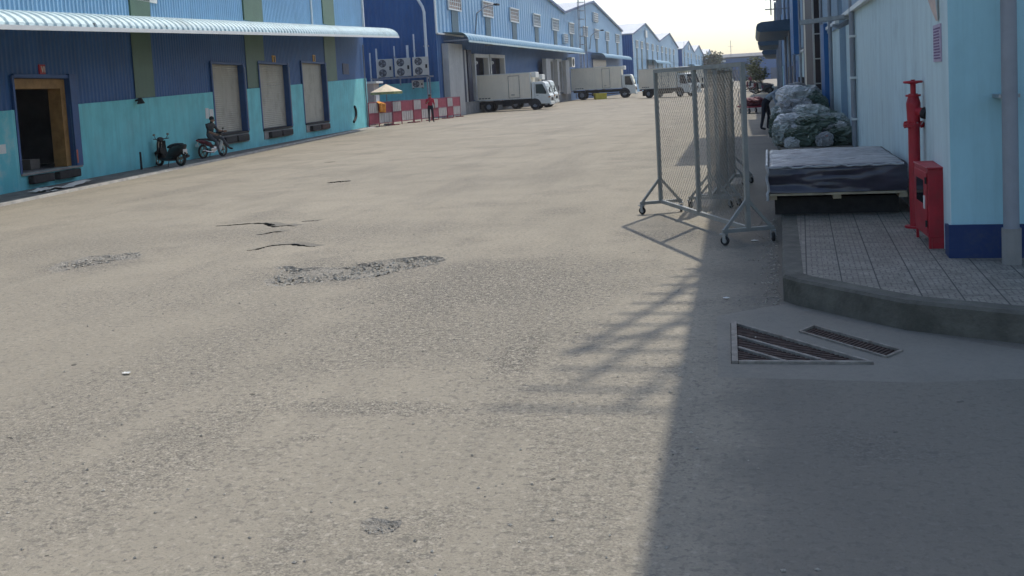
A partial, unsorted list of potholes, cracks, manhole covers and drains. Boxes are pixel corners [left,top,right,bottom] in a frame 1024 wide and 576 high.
pothole [48,252,141,273]
pothole [263,256,446,287]
drain grate [799,325,903,358]
drain grate [731,321,874,365]
crack [217,219,323,251]
pothole [360,518,402,535]
